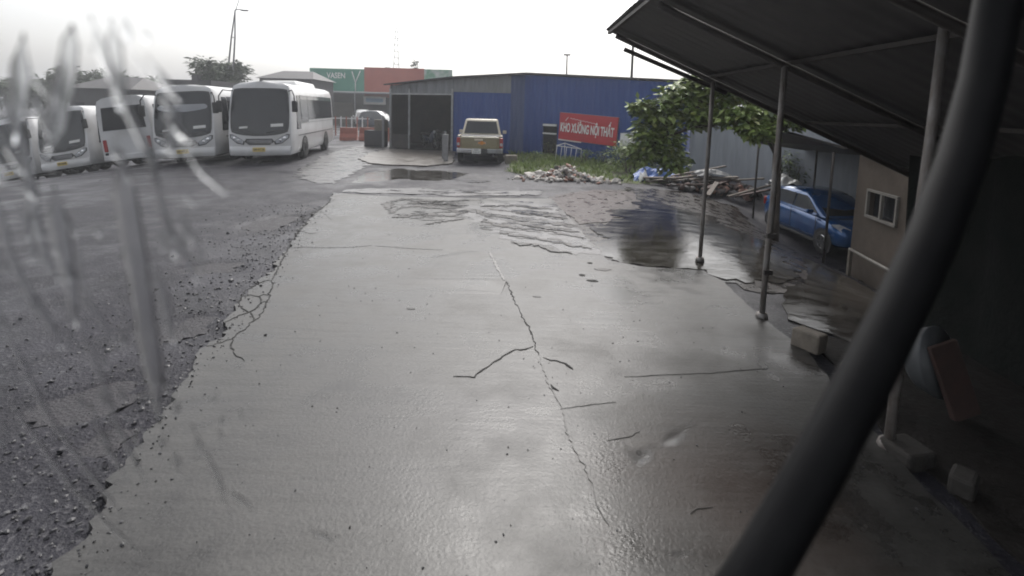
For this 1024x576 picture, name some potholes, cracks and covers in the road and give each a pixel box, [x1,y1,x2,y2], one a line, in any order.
crack [454,346,613,409]
crack [210,199,372,360]
